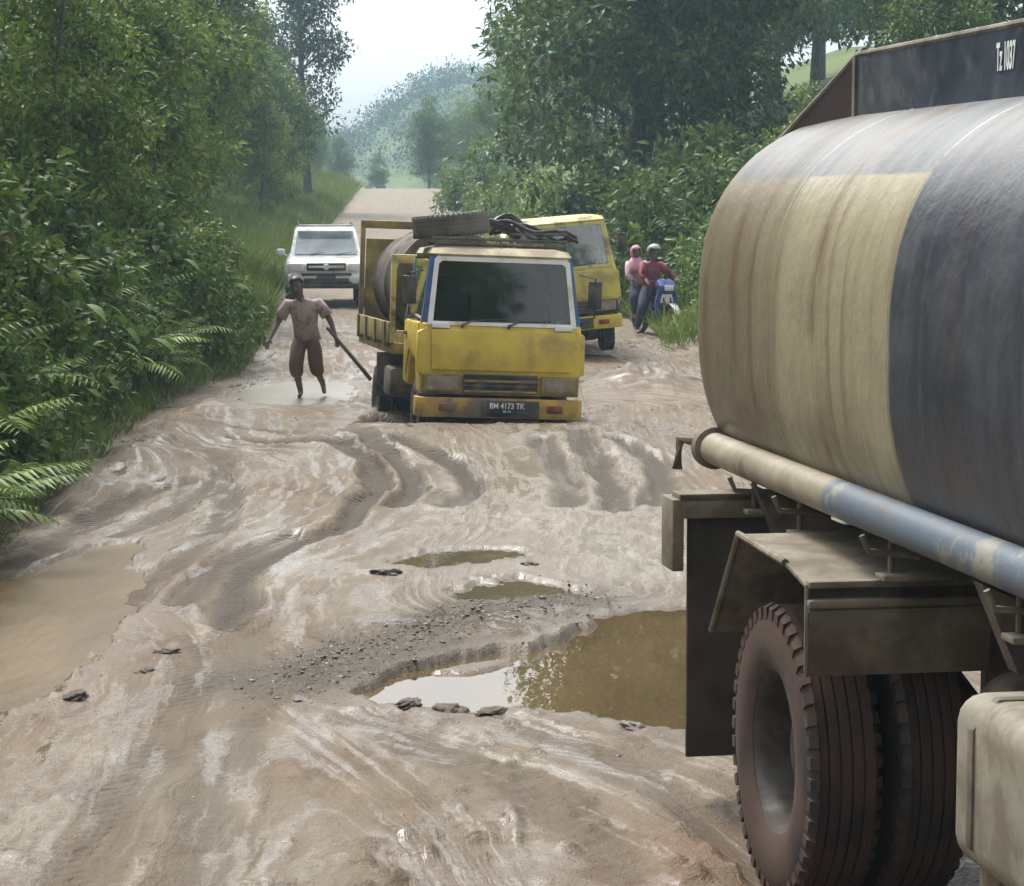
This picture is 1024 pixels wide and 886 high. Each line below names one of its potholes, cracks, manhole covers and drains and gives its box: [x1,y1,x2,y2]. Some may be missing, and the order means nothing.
pothole [0,535,167,722]
pothole [319,596,686,735]
